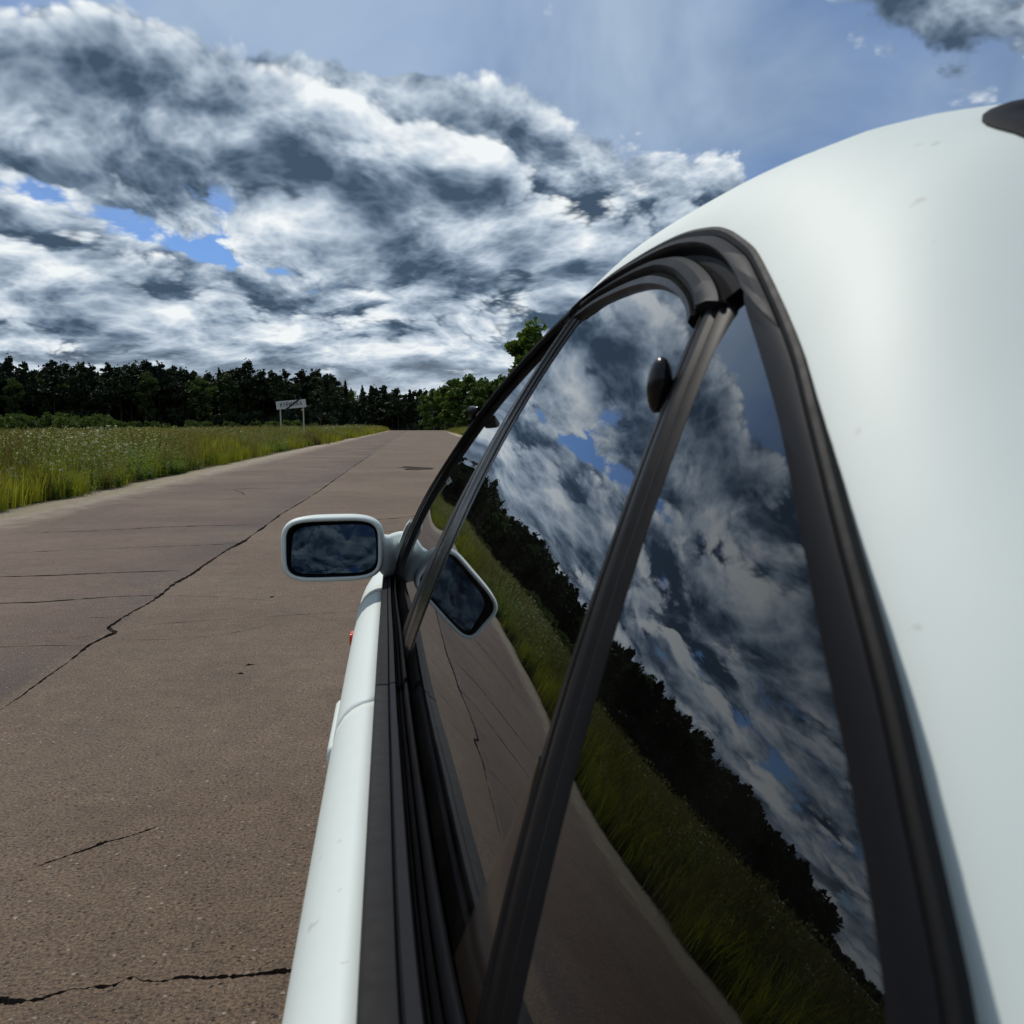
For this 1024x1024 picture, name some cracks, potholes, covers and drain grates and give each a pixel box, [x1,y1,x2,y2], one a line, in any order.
crack [0,968,292,1005]
crack [0,455,370,709]
crack [33,824,164,868]
